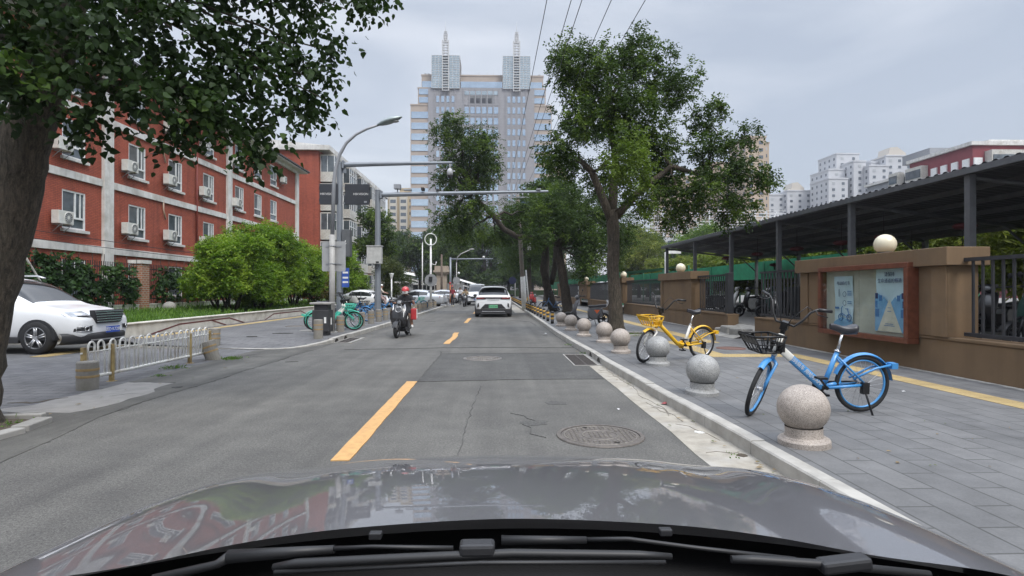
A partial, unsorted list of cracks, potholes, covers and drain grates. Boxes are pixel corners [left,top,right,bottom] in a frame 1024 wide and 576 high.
crack [457,387,481,456]
drain grate [563,354,603,366]
manhole cover [556,424,645,448]
